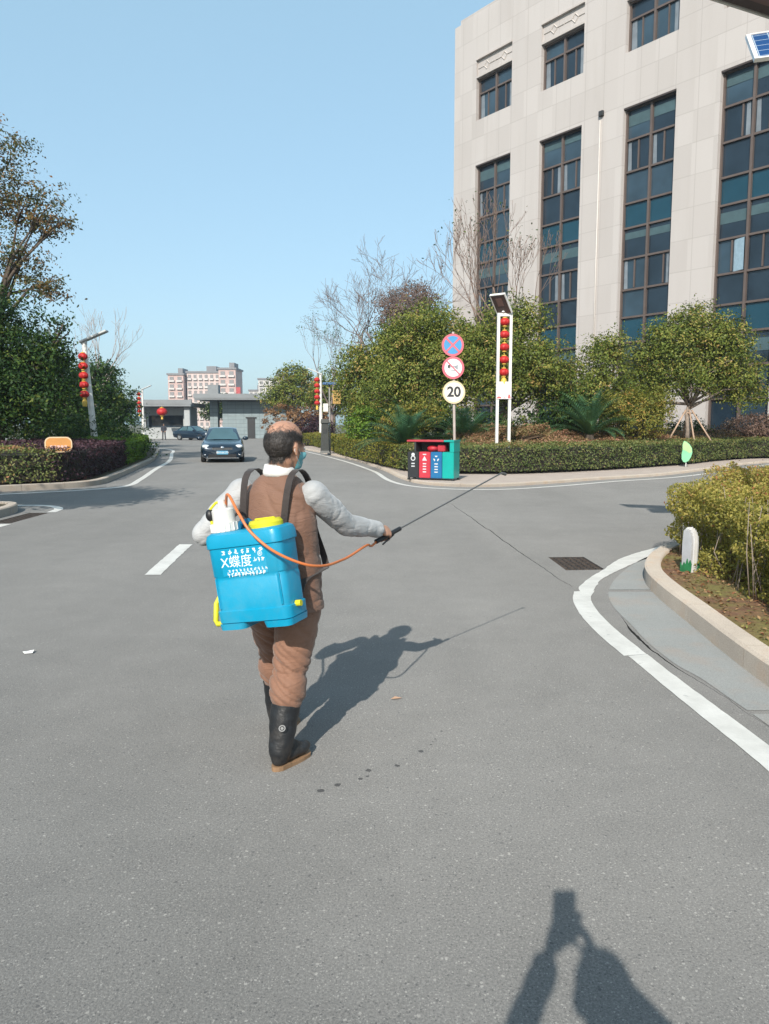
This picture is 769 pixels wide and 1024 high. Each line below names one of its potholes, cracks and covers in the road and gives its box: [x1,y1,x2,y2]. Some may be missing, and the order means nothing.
drain grate [549,557,603,570]
